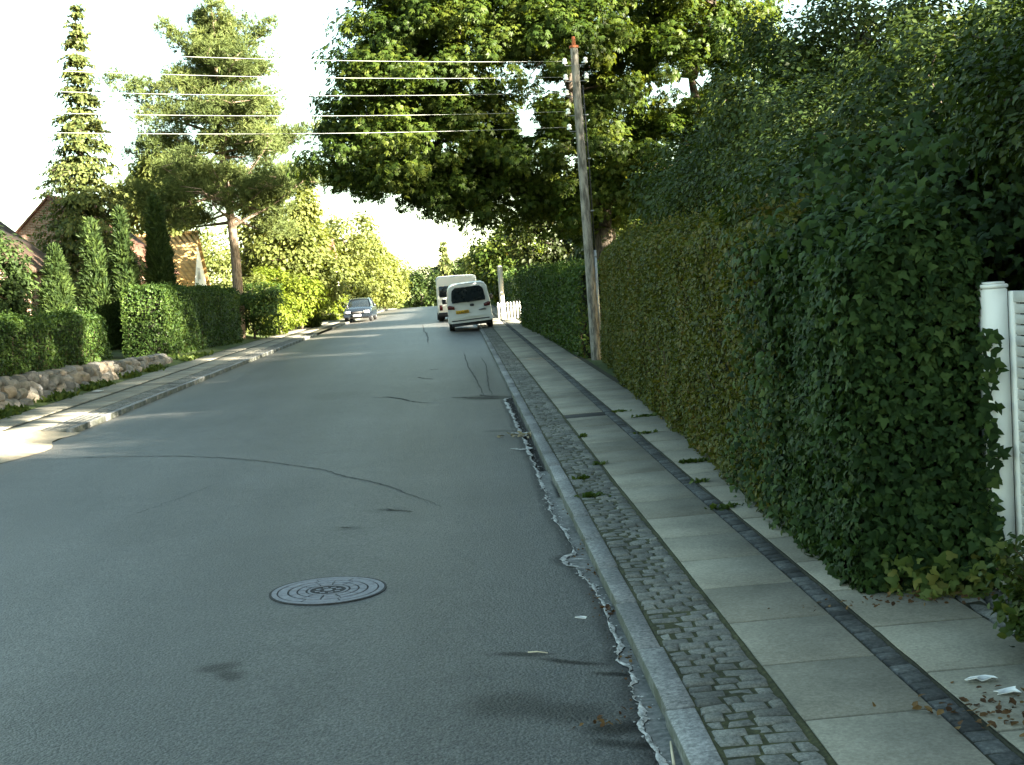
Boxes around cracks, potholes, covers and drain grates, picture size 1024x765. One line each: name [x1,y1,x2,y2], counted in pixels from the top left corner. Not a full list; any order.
manhole cover [269,576,387,606]
crack [451,354,671,765]
crack [46,456,441,512]
